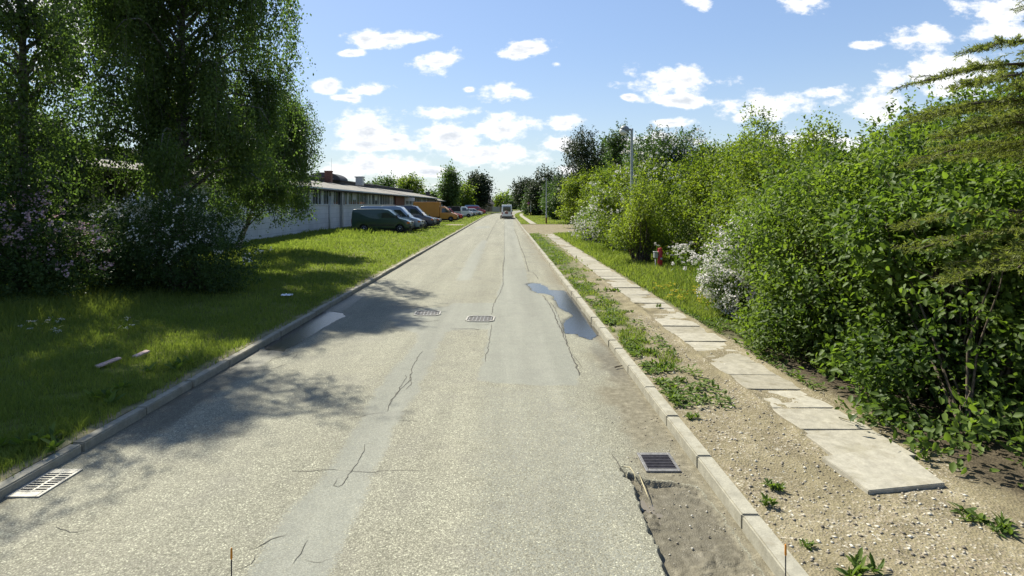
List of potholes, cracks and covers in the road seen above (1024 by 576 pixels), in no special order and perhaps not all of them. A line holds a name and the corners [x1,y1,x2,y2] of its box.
crack [477,223,538,362]
drain grate [5,469,83,498]
crack [352,352,422,421]
crack [545,298,580,375]
crack [314,444,384,487]
drain grate [637,452,681,473]
